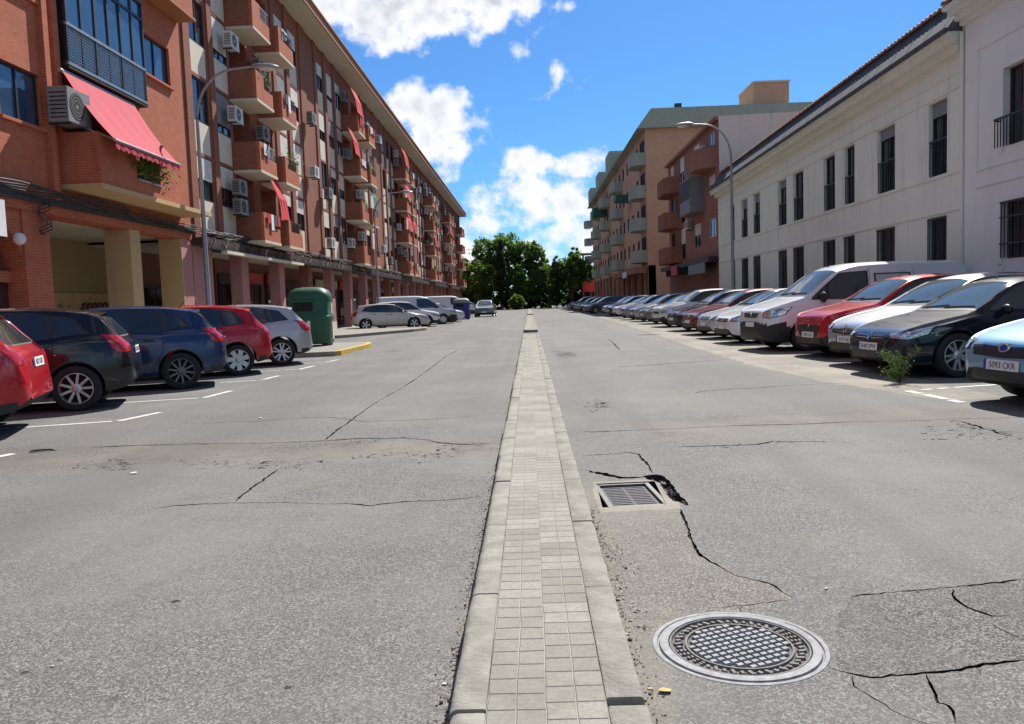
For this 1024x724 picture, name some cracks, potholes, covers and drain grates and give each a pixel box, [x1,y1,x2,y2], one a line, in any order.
crack [585,417,1024,448]
crack [635,509,796,628]
crack [72,350,494,509]
drain grate [597,483,666,508]
manhole cover [652,612,831,686]
